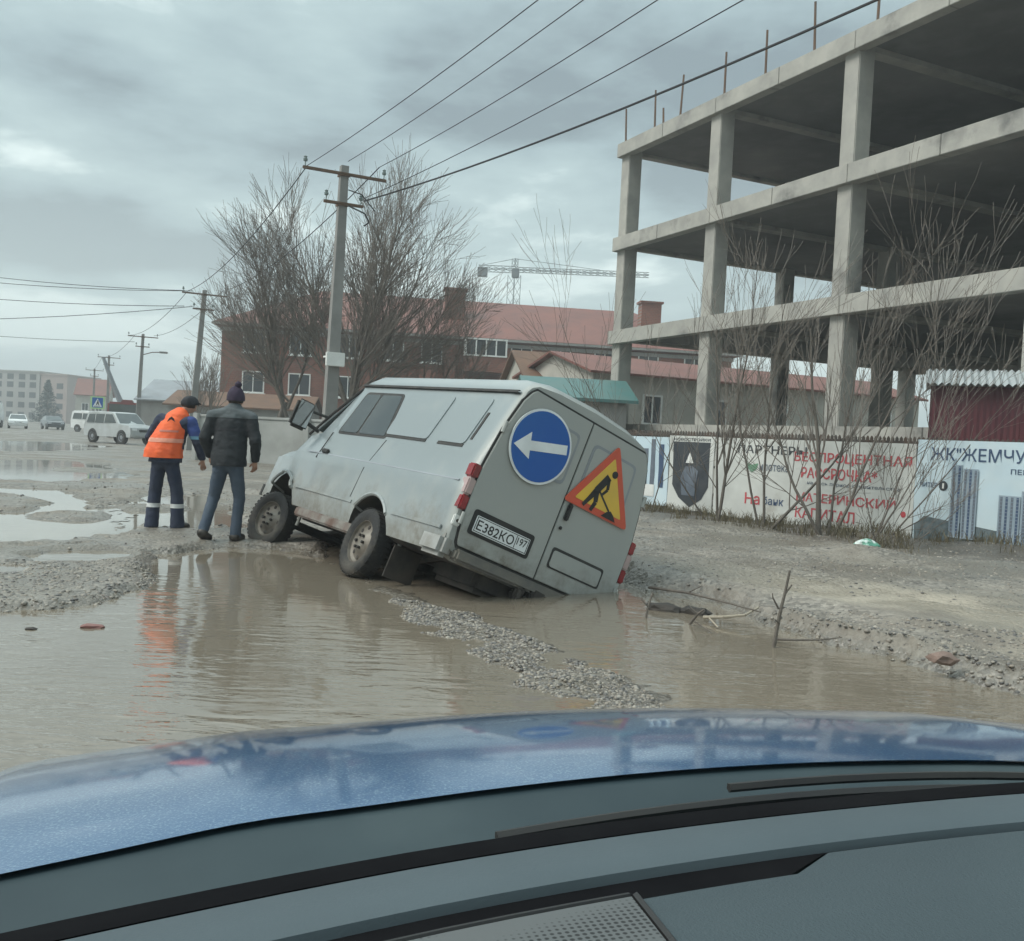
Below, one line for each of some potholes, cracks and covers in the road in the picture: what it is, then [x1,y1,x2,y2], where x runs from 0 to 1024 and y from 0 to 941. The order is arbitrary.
pothole [0,457,150,483]
pothole [0,539,628,771]
pothole [311,534,1024,724]
pothole [0,439,115,452]
pothole [0,484,146,546]
